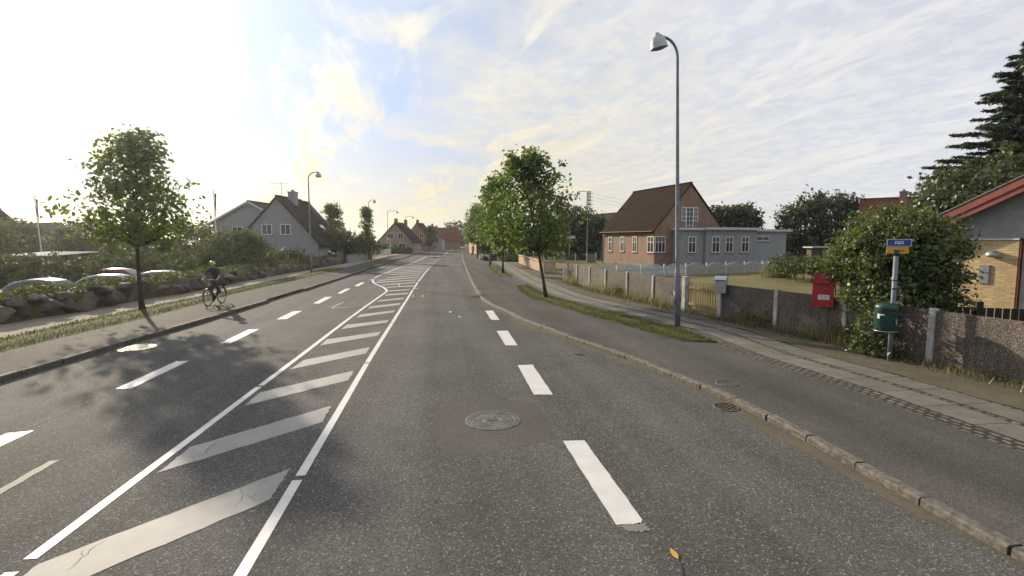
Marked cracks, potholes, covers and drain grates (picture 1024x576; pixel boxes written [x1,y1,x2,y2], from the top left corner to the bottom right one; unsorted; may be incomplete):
manhole cover [465,411,520,430]
drain grate [712,402,740,411]
